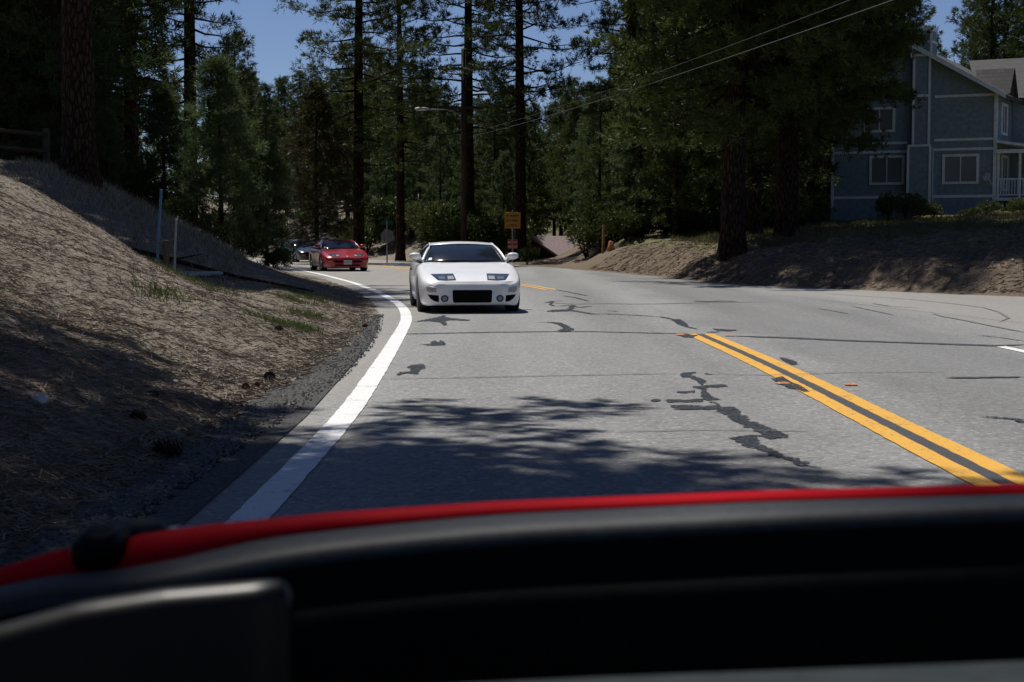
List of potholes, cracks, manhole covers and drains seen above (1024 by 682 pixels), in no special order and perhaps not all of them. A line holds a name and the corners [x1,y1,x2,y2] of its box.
crack [817,292,1024,341]
